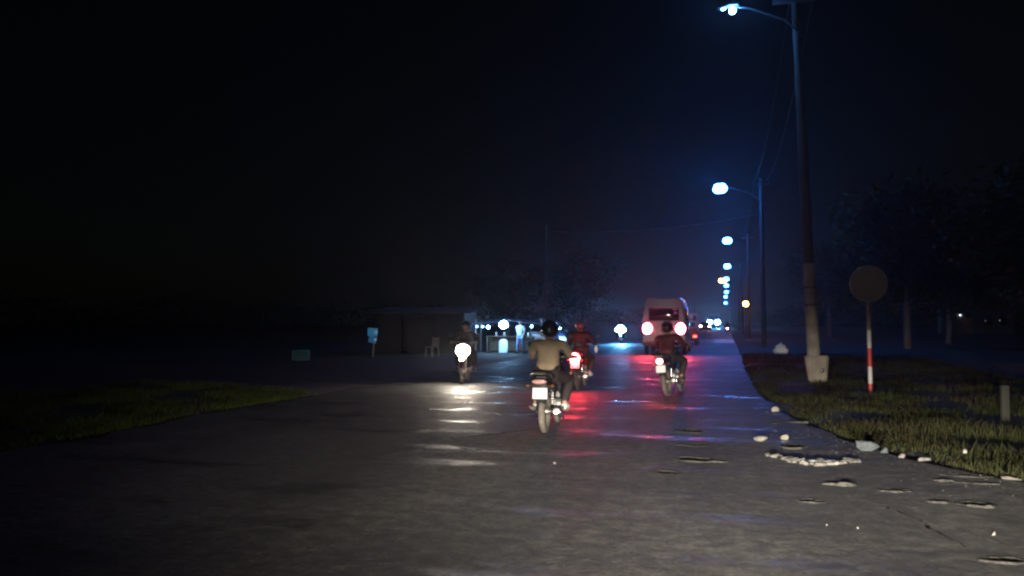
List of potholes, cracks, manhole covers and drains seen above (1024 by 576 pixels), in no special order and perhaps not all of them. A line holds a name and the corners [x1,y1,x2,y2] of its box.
pothole [977,556,1024,565]
crack [866,500,1016,549]
pothole [765,450,861,466]
